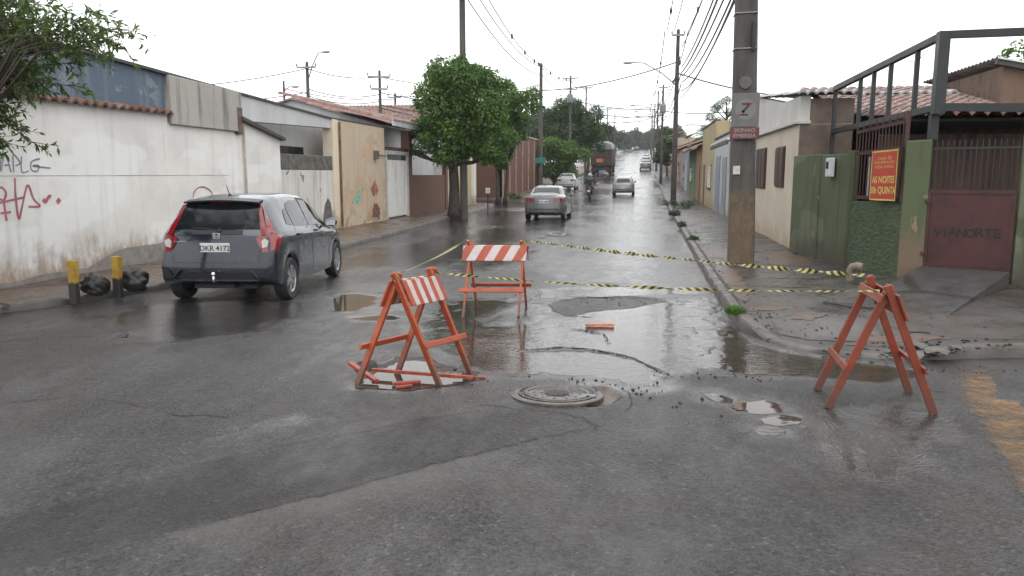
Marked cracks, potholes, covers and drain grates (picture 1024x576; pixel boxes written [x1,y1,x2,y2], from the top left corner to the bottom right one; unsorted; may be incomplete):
manhole cover [510,385,604,407]
pothole [355,356,480,391]
crack [489,328,665,375]
